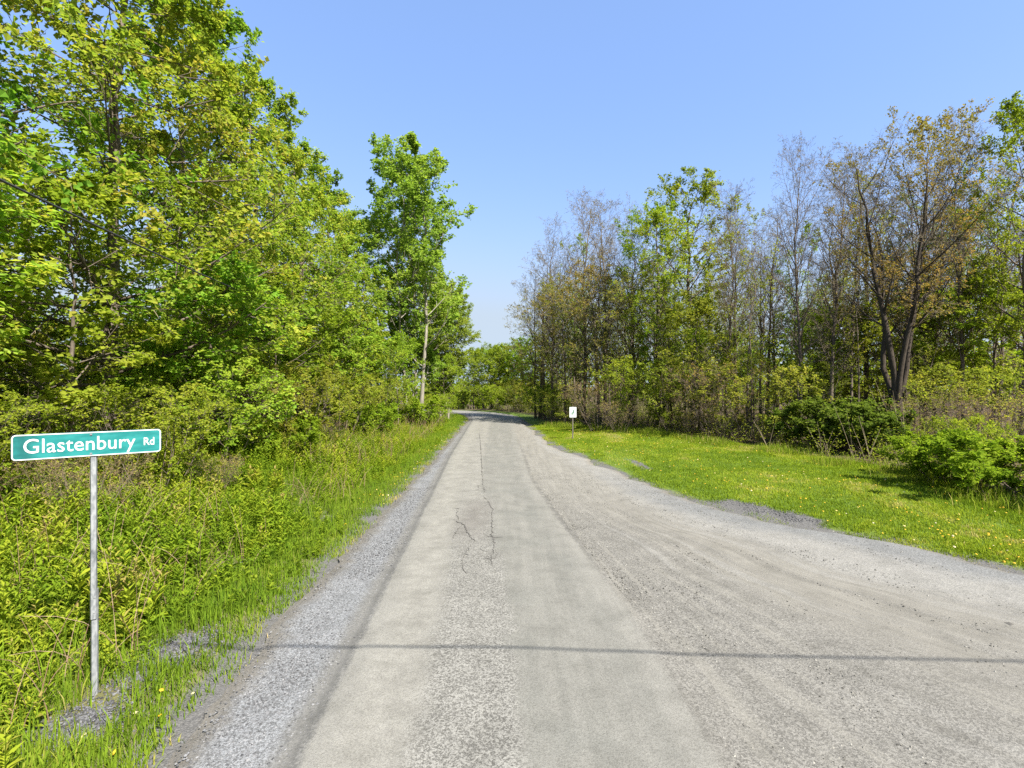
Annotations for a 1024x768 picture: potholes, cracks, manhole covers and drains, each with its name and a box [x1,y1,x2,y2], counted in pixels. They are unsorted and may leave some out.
crack [453,435,496,573]
